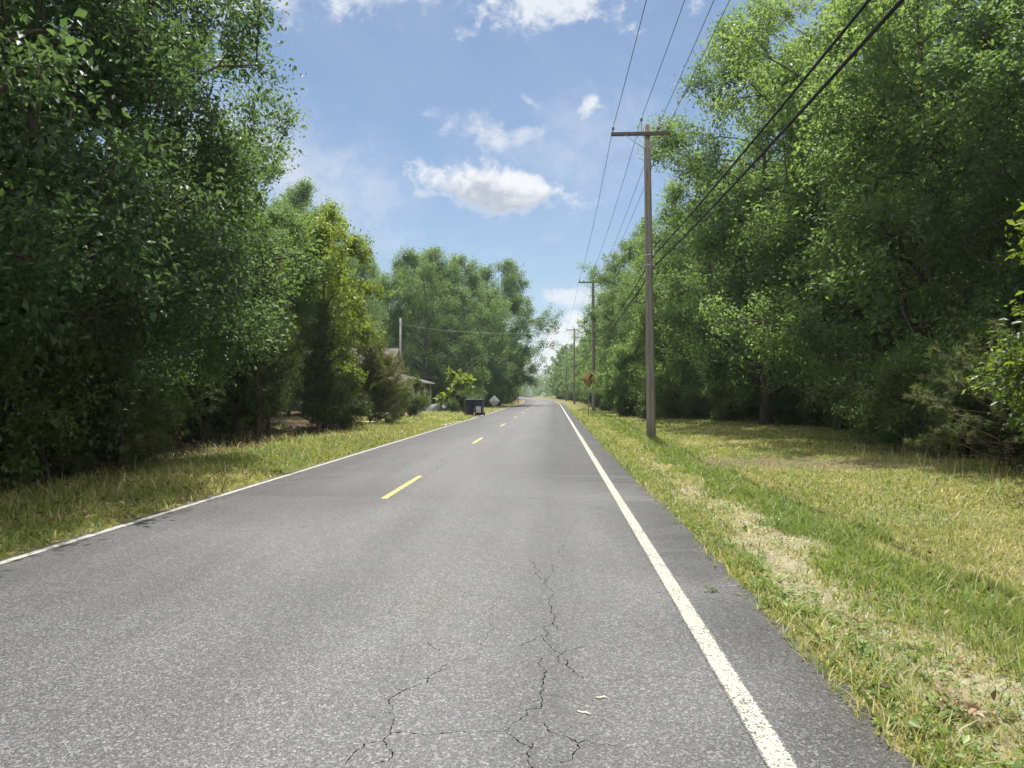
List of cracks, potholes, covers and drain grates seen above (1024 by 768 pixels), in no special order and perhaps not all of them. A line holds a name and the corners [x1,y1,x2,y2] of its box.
crack [505,539,618,768]
crack [346,643,465,768]
